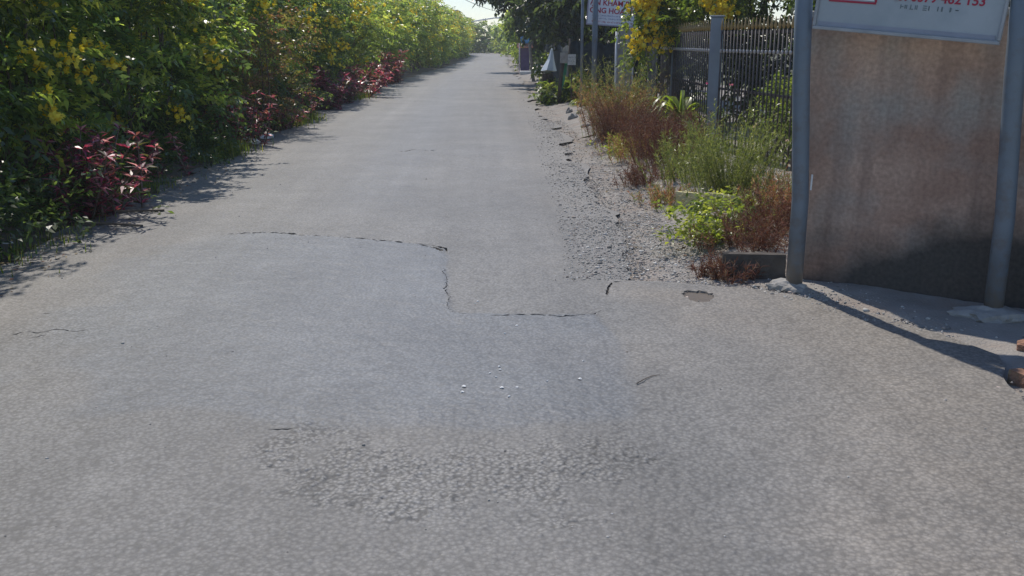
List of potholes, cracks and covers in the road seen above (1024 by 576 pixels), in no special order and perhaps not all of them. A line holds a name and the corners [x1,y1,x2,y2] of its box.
crack [12,311,89,338]
pothole [682,290,714,302]
crack [237,232,447,251]
